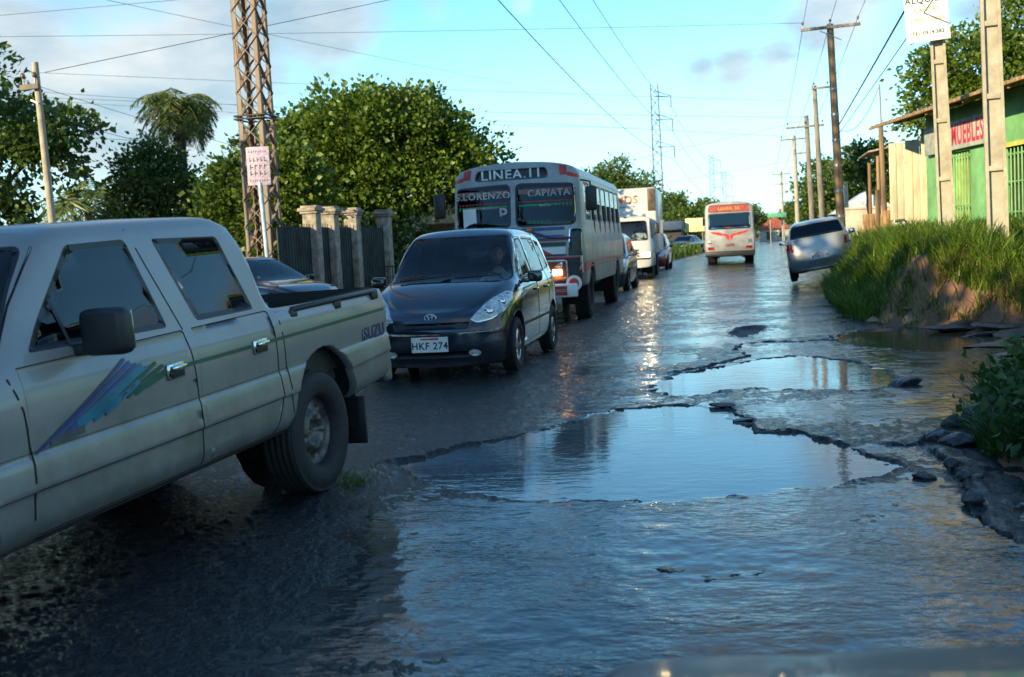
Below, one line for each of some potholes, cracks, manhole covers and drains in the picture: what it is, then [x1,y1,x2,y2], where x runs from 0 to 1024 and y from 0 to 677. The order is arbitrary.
pothole [829,328,985,352]
pothole [728,325,768,338]
pothole [649,355,902,397]
pothole [379,403,910,505]
